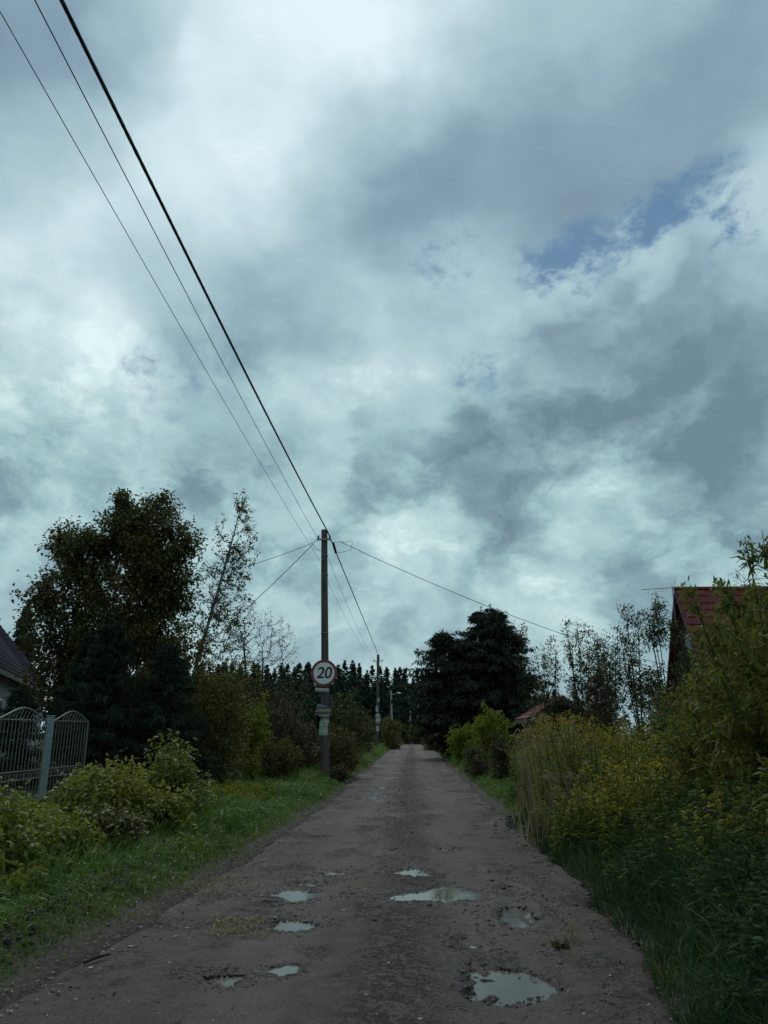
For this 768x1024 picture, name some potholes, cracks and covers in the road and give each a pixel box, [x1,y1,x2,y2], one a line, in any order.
pothole [361,793,388,801]
pothole [485,897,556,936]
pothole [252,886,338,903]
pothole [184,965,262,990]
pothole [373,883,498,905]
pothole [253,914,335,934]
pothole [388,865,434,878]
pothole [264,962,304,978]
pothole [314,869,356,877]
